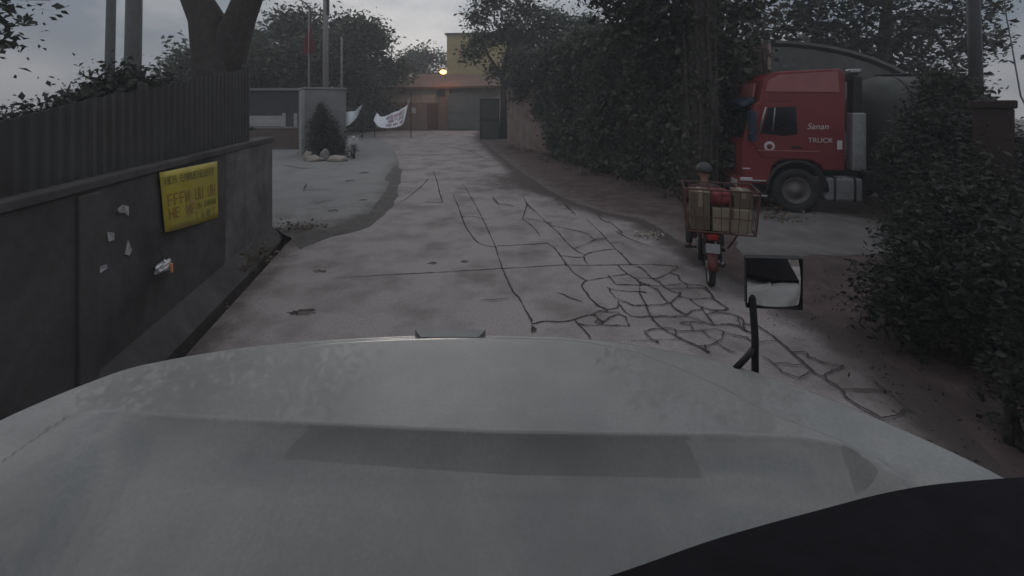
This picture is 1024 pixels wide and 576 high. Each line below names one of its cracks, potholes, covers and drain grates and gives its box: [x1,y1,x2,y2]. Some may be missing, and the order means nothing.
crack [404,171,922,418]
